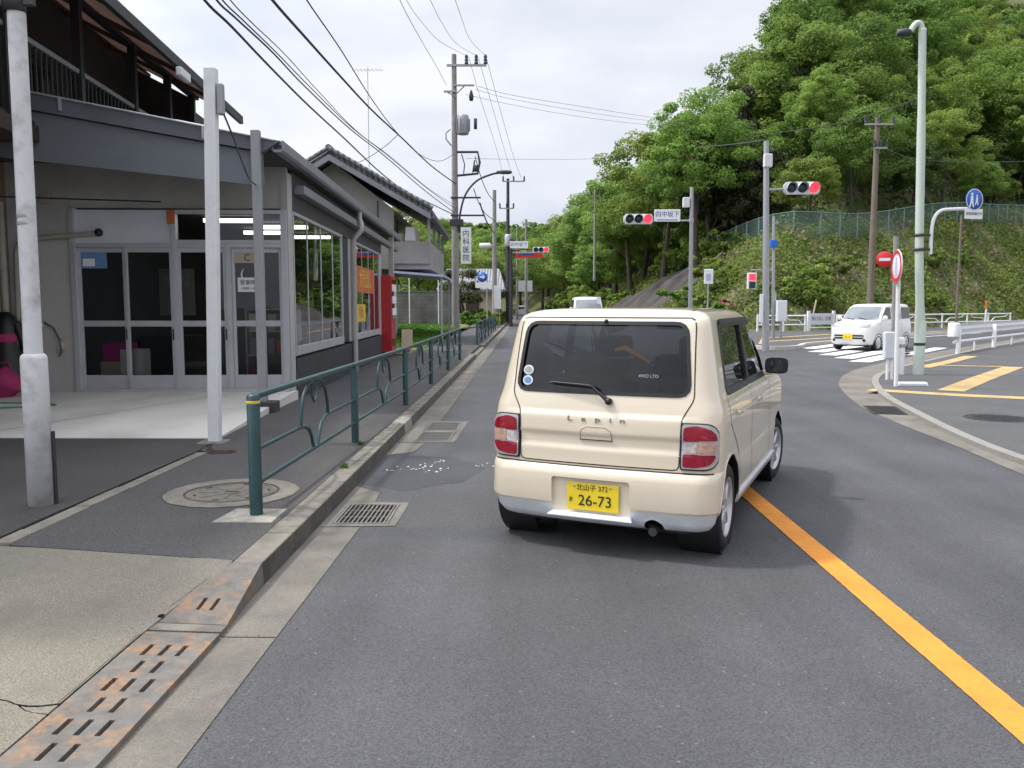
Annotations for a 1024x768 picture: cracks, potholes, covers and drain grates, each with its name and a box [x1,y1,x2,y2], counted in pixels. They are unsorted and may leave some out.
drain grate [863,405,909,415]
drain grate [333,504,400,524]
drain grate [425,422,462,430]
drain grate [415,432,455,441]
manhole cover [963,414,1024,422]
manhole cover [162,479,299,508]
